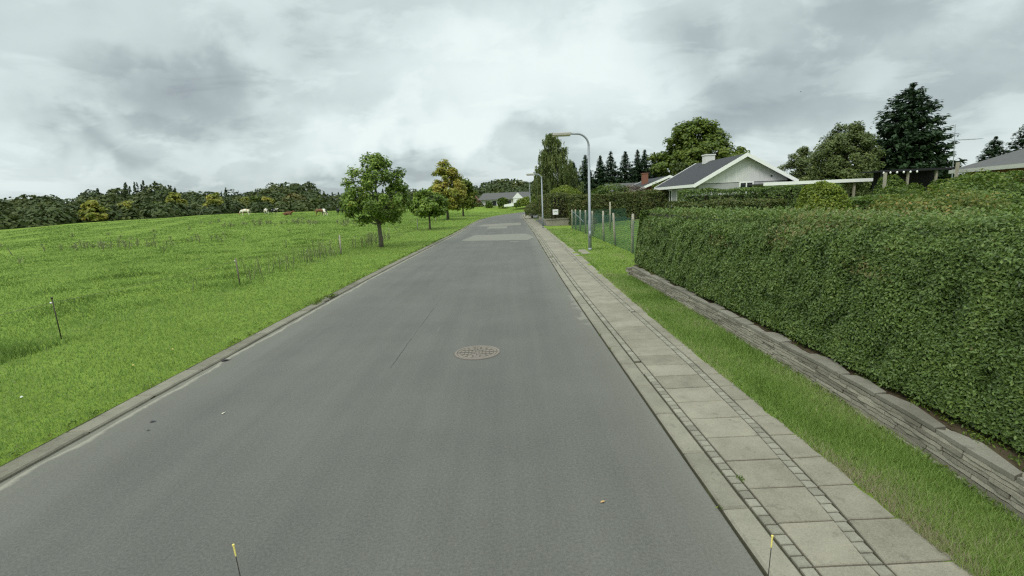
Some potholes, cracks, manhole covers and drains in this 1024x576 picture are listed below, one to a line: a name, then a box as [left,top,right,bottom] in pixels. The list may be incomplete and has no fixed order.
manhole cover [454,345,501,360]
